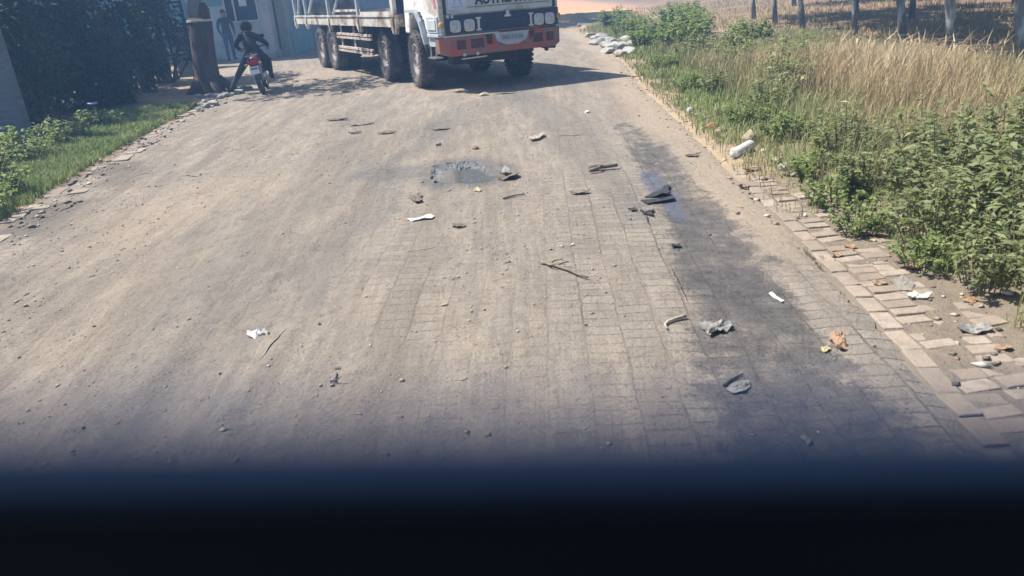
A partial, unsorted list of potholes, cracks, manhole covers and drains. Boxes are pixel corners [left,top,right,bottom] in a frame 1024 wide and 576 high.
pothole [430,161,494,183]
